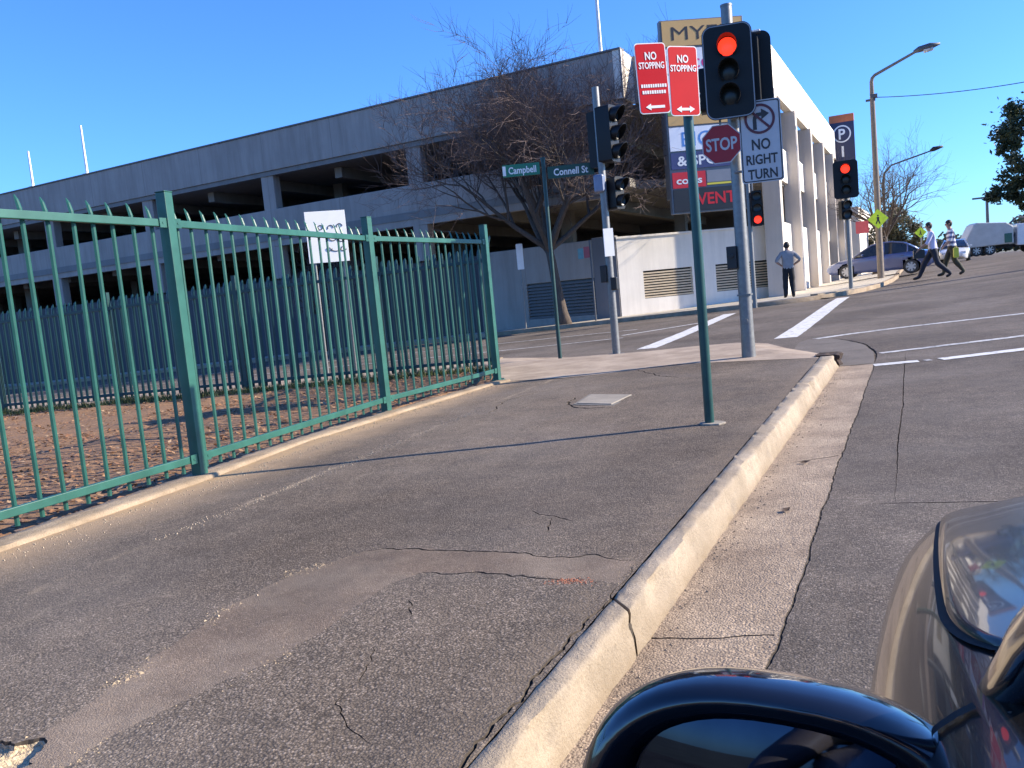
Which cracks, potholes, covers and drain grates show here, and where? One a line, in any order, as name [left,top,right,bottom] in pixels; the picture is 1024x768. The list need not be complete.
crack [370,548,633,768]
manhole cover [573,394,632,405]
crack [334,648,375,744]
pothole [0,737,48,768]
